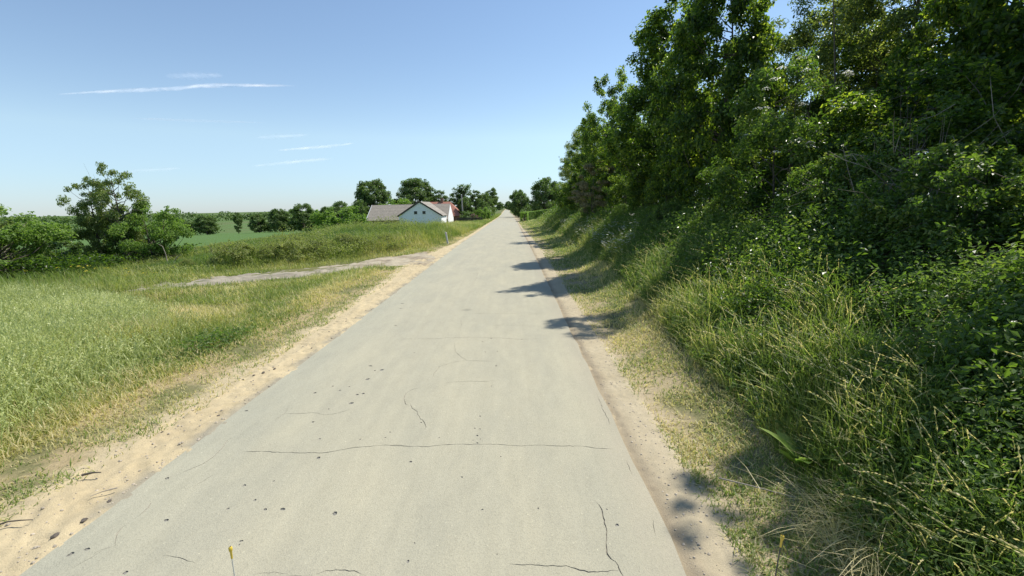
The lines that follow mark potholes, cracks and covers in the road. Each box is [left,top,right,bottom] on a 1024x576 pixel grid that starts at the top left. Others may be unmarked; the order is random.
crack [514,502,622,574]
crack [180,313,607,484]
